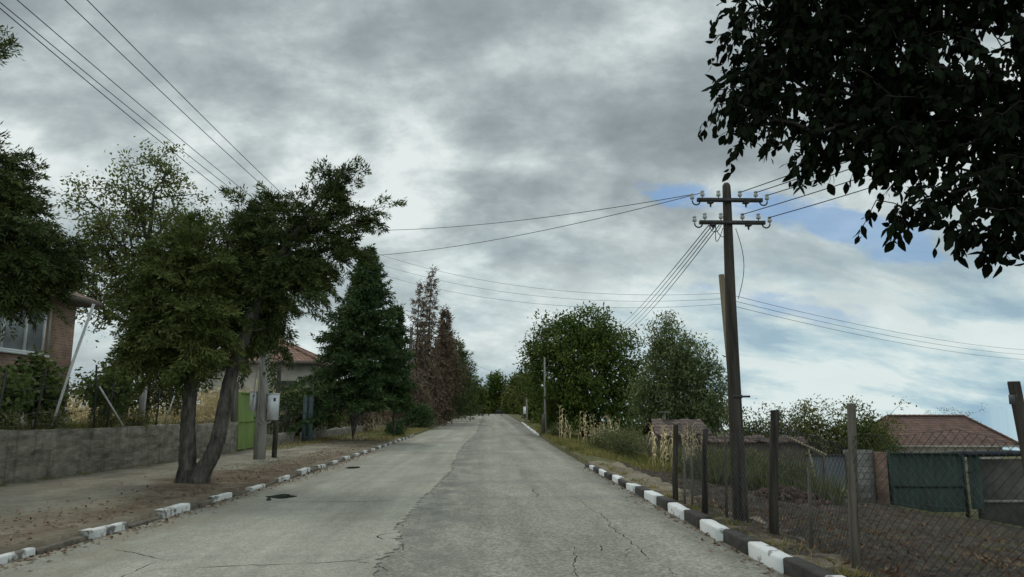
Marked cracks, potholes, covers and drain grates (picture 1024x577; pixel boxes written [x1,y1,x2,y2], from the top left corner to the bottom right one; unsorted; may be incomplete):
crack [576,498,673,574]
